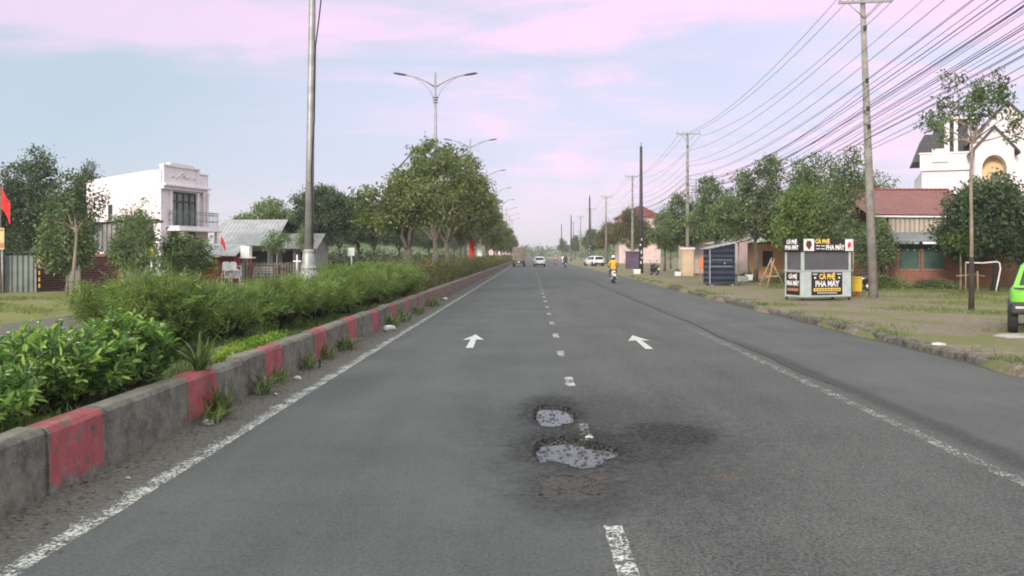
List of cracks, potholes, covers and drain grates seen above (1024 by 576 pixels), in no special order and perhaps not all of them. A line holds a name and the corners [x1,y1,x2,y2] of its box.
pothole [522,400,588,432]
pothole [511,427,654,476]
